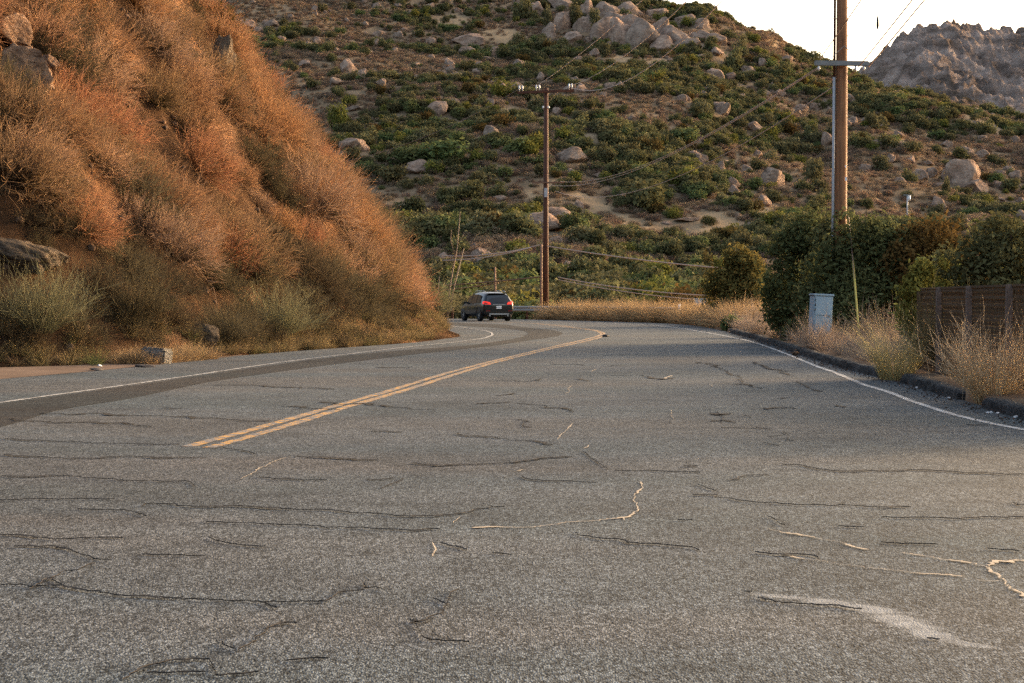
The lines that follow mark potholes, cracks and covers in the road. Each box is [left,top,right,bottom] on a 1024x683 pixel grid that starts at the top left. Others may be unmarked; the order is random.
crack [266,378,1024,576]
crack [0,407,269,486]
crack [743,590,940,640]
crack [0,498,504,556]
crack [409,589,469,642]
crack [696,362,846,409]
crack [0,534,385,680]
